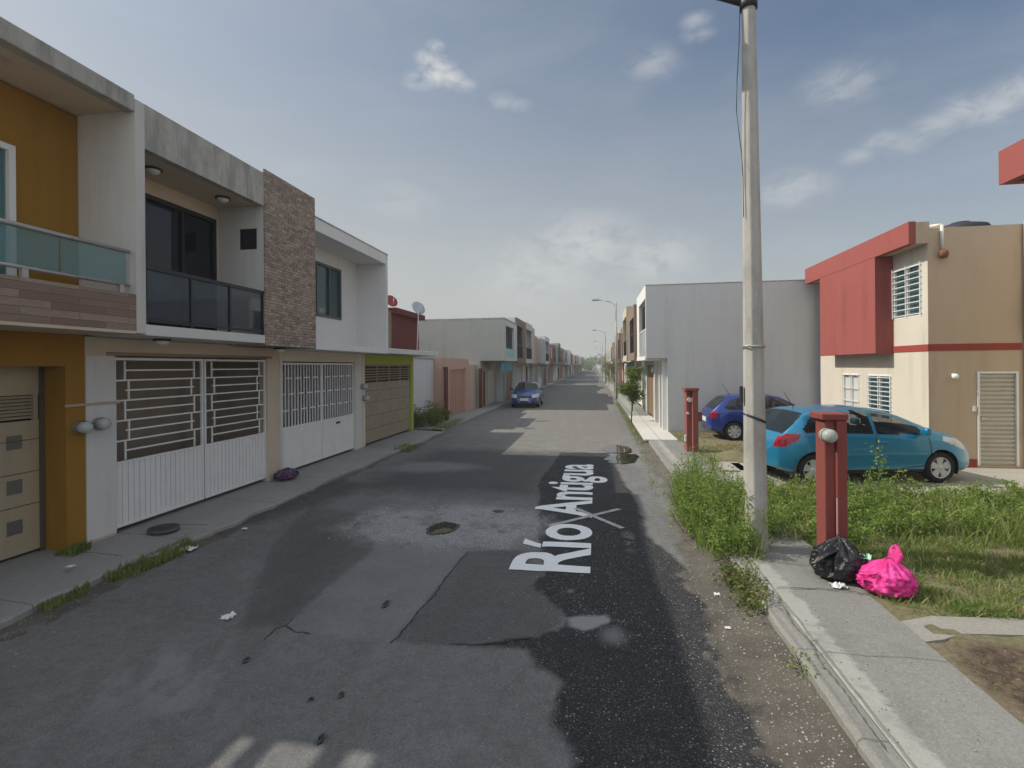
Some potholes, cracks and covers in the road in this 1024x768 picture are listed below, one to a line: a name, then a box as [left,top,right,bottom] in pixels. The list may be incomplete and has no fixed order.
manhole cover [146,523,180,535]
pothole [425,521,460,535]
